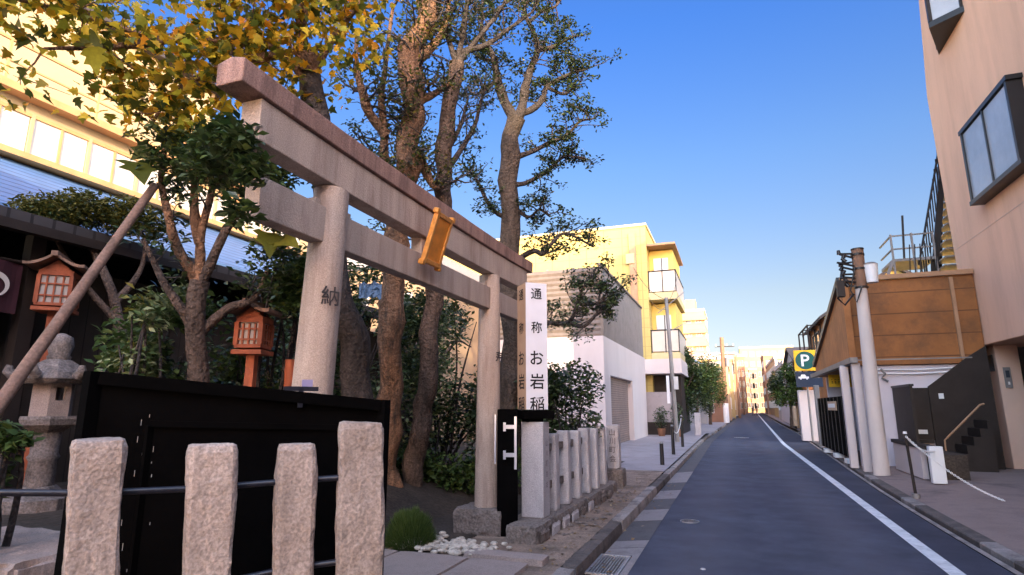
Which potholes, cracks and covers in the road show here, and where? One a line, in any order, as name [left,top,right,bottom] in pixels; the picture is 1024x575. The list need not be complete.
drain grate [584,554,631,575]
